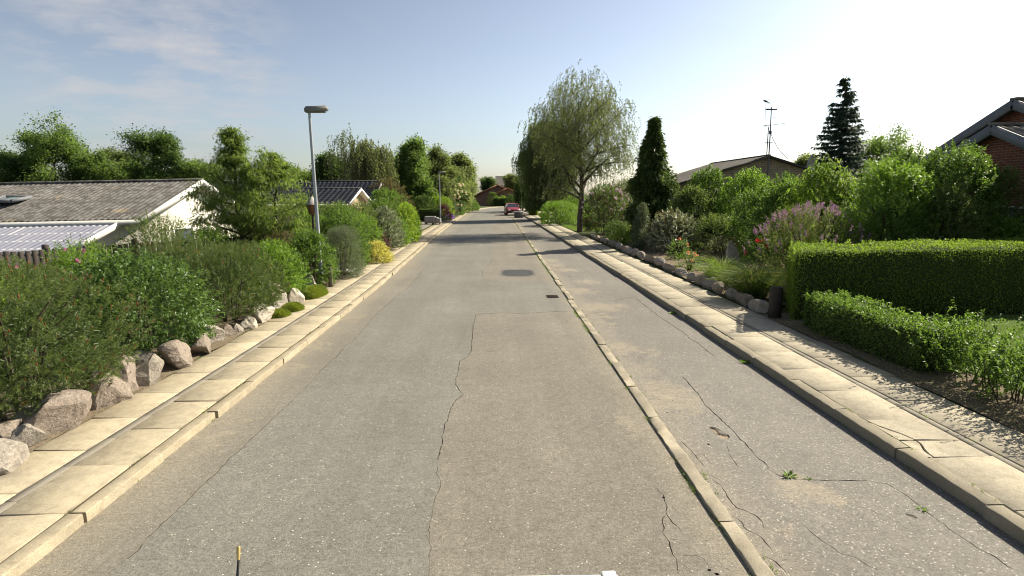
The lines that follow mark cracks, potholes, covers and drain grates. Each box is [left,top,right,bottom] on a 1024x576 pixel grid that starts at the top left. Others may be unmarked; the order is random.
crack [684,378,1016,571]
pothole [709,427,730,439]
crack [658,490,709,570]
